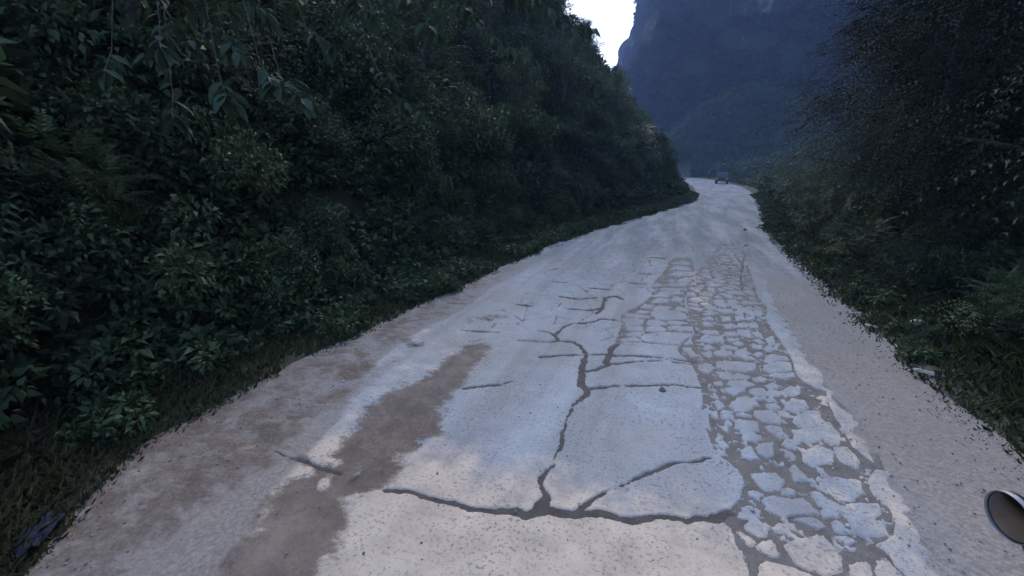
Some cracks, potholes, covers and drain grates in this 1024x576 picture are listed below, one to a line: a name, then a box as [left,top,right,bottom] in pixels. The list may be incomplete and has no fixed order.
crack [383,228,906,576]
crack [273,451,343,476]
